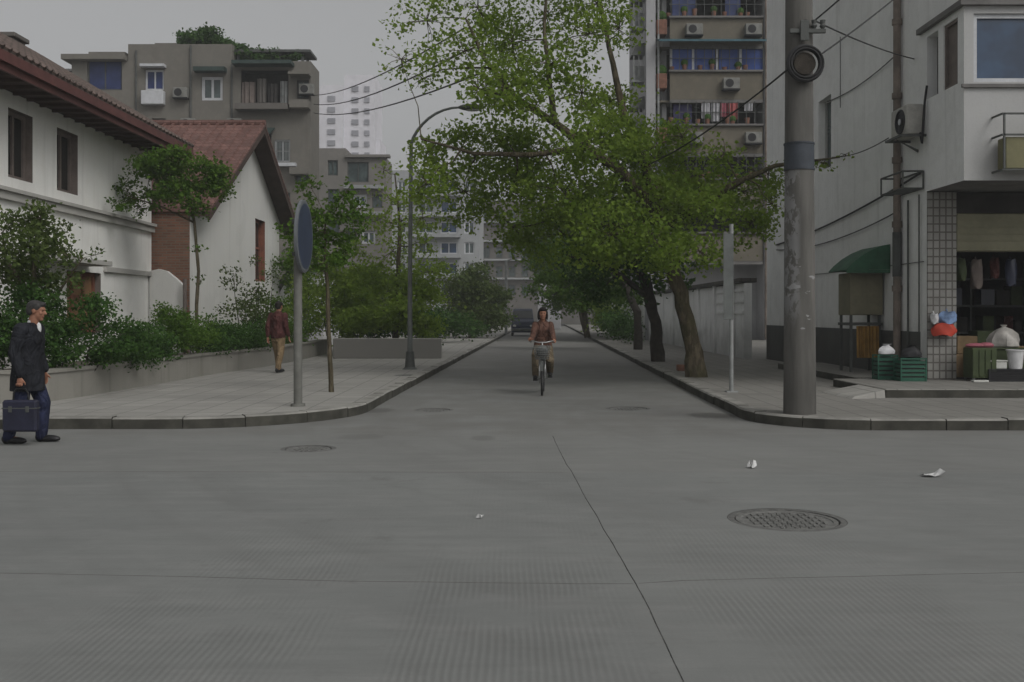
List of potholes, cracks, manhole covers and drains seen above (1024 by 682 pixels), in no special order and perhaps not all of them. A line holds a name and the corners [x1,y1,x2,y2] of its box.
manhole cover [728,508,847,532]
